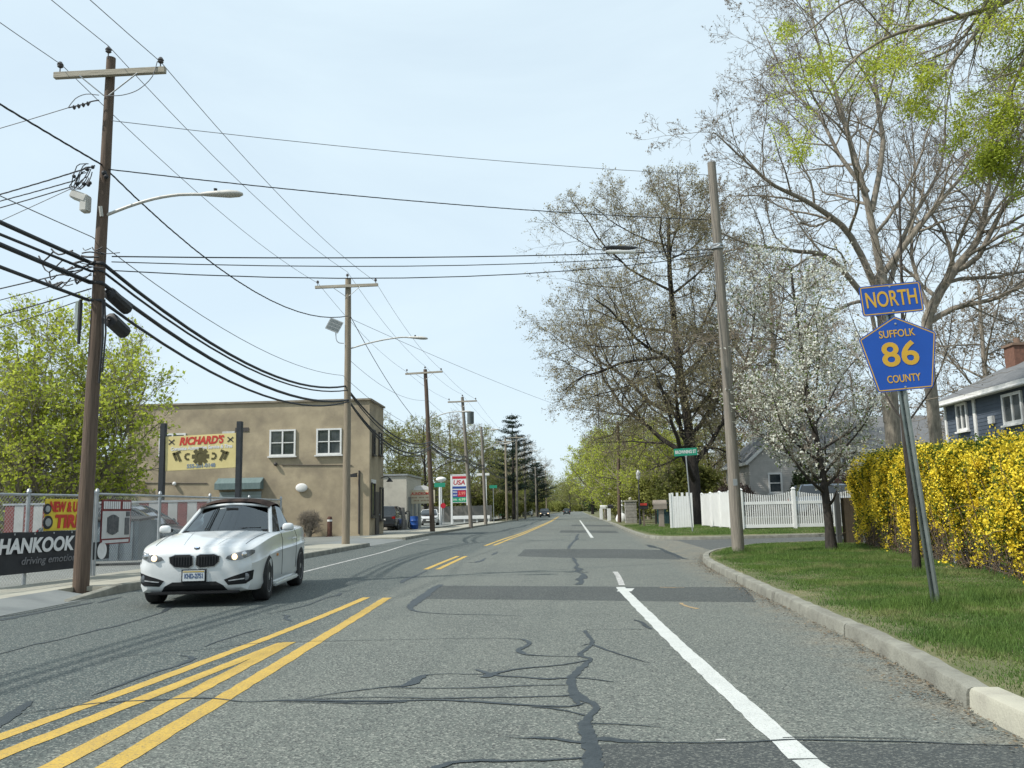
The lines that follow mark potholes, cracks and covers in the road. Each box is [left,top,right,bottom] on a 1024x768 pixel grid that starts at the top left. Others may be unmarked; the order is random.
crack [555,534,588,585]
crack [0,700,34,727]
